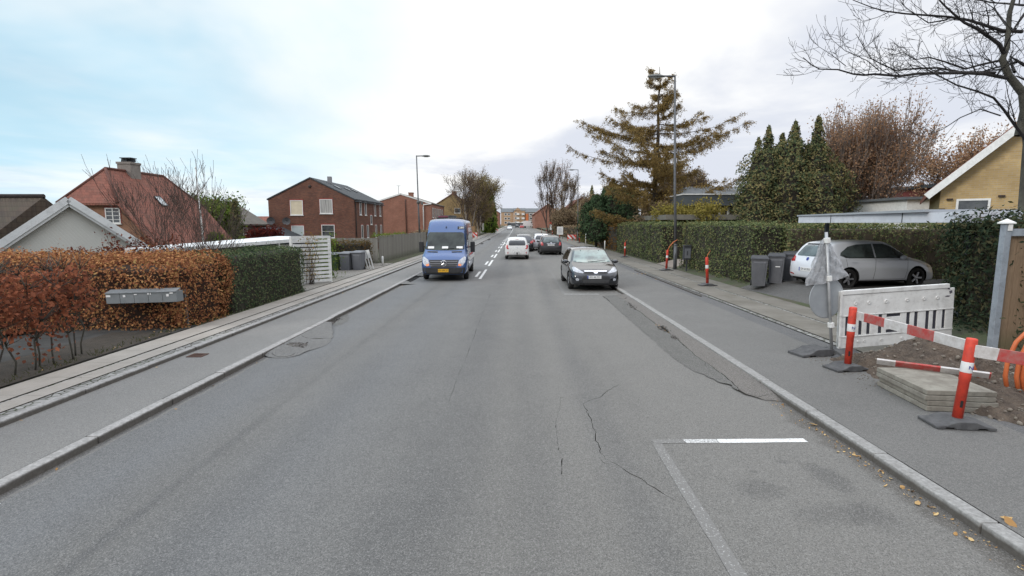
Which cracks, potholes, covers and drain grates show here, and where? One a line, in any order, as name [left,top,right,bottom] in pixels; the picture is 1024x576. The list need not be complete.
crack [583,386,667,496]
